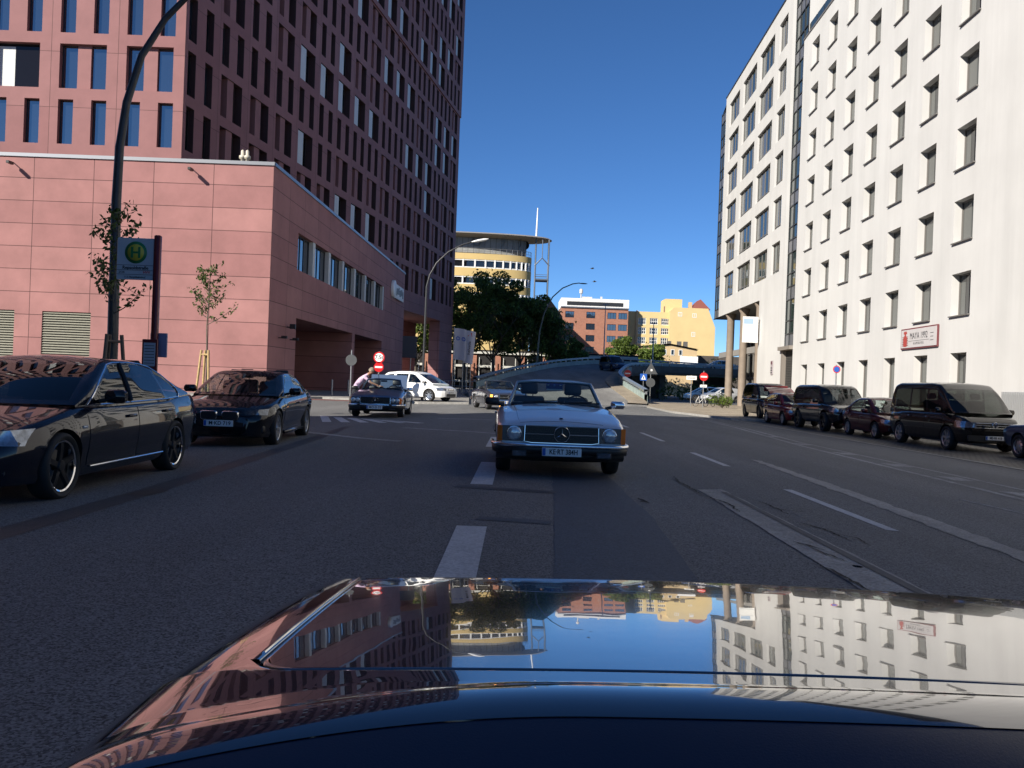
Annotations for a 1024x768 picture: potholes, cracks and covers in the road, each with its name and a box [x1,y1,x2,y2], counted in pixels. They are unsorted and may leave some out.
crack [675,478,740,512]
crack [760,501,869,590]
